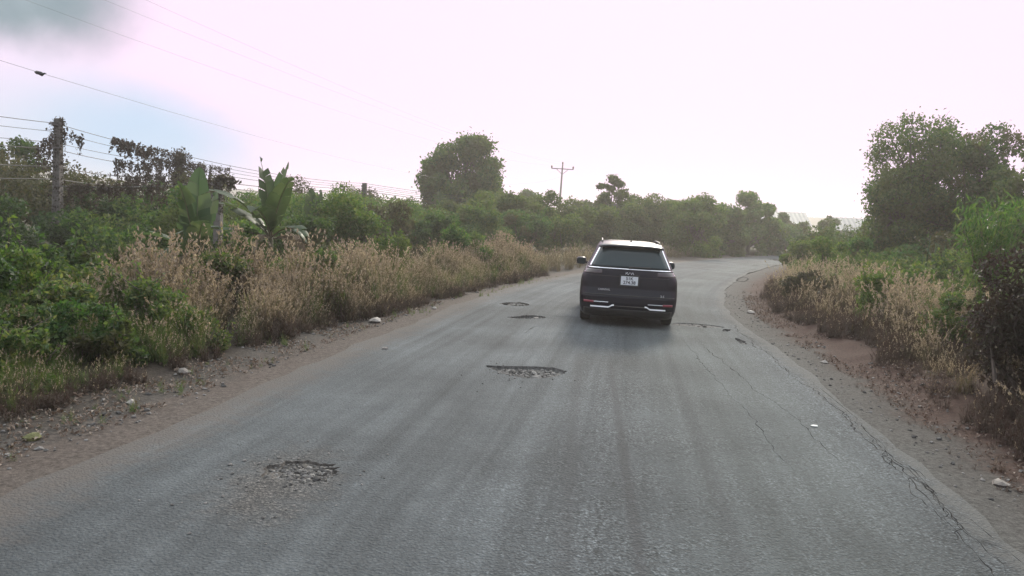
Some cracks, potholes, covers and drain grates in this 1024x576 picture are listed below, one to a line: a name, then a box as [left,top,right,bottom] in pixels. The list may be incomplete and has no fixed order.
crack [678,337,850,474]
crack [735,325,1021,576]
pothole [261,460,340,484]
pothole [486,365,567,379]
